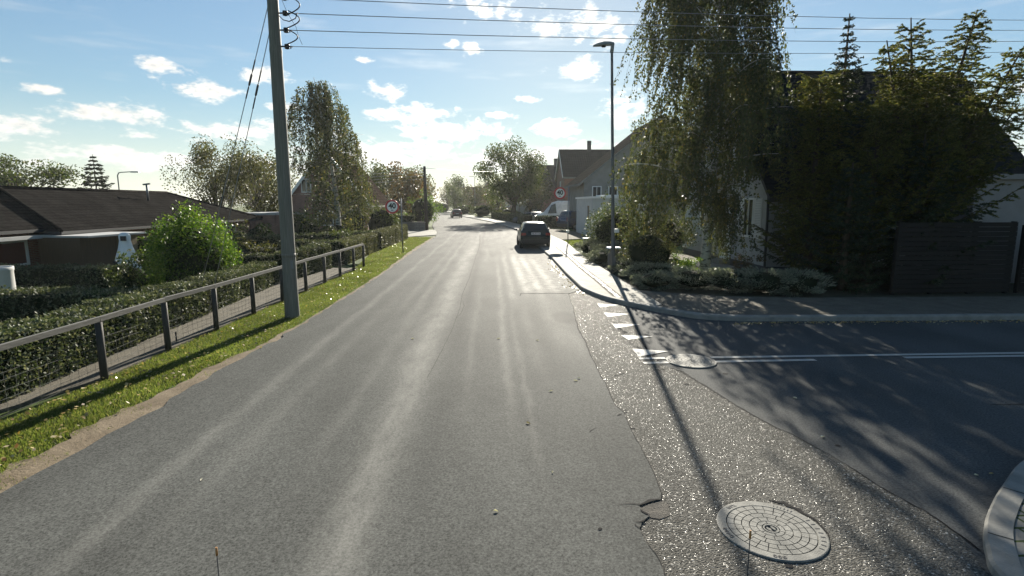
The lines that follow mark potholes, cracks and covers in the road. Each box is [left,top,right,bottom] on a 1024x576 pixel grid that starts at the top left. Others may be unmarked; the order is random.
crack [568,293,667,576]
manhole cover [716,501,830,563]
manhole cover [666,354,717,369]
